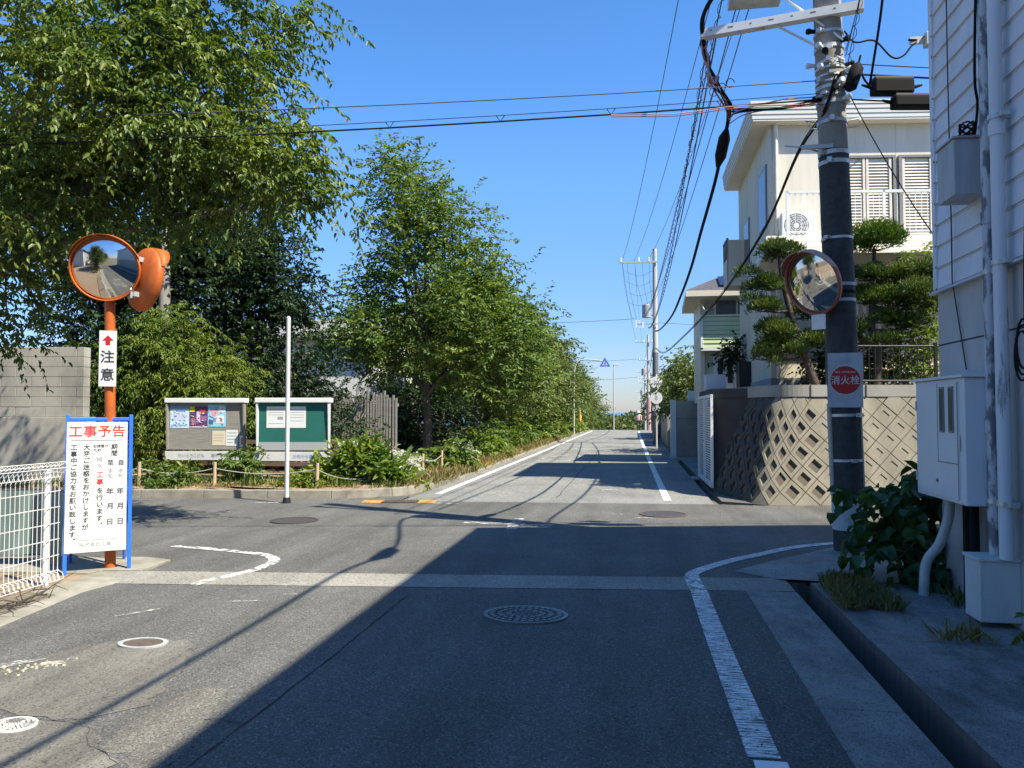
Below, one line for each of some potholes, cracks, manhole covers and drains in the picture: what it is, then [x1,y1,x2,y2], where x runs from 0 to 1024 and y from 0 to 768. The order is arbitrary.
manhole cover [0,716,38,733]
crack [37,718,117,763]
manhole cover [483,605,568,625]
manhole cover [117,637,168,649]
